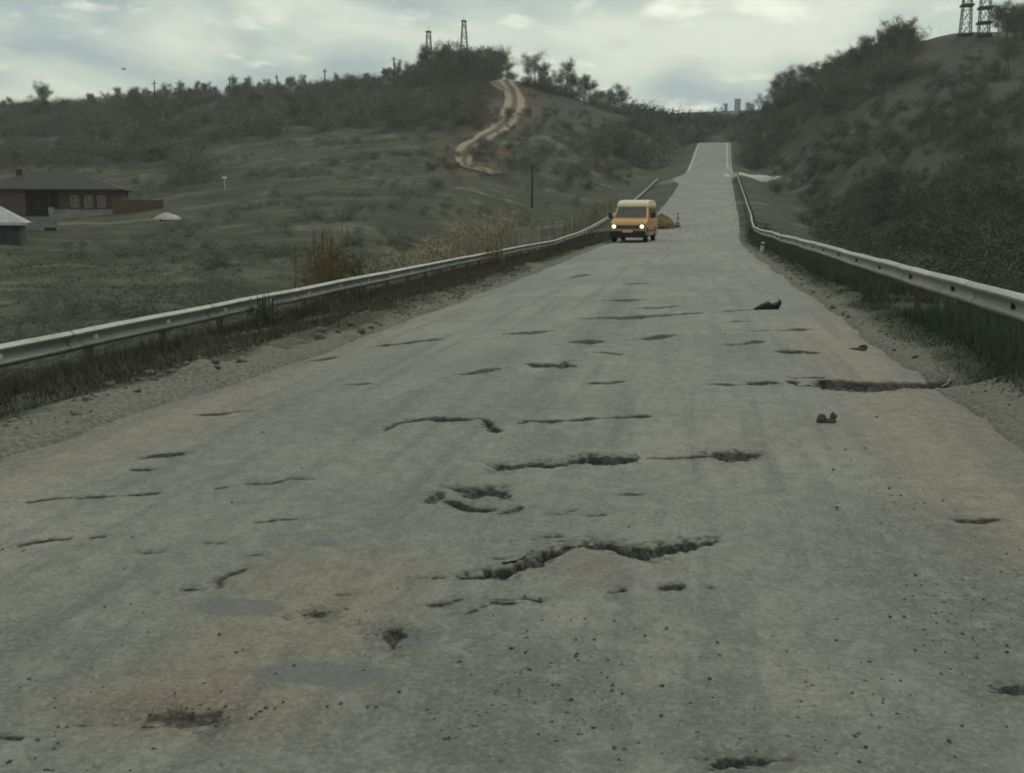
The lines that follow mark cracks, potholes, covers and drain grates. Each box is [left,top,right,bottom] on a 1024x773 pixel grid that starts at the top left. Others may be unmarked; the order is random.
pothole [472,448,645,475]
crack [0,448,749,634]
pothole [400,530,742,587]
pothole [686,446,778,466]
pothole [431,480,534,504]
pothole [808,377,952,394]
crack [302,411,663,437]
